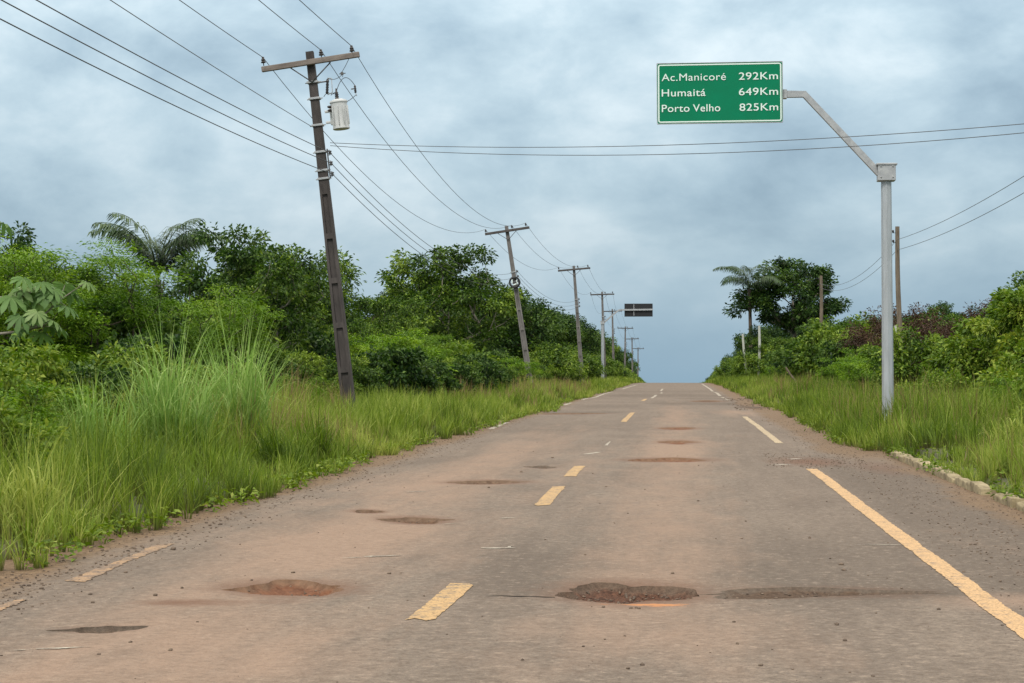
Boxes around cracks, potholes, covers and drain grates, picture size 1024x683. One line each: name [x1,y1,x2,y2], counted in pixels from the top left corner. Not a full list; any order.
pothole [555,582,709,604]
pothole [223,579,344,596]
pothole [700,587,949,599]
